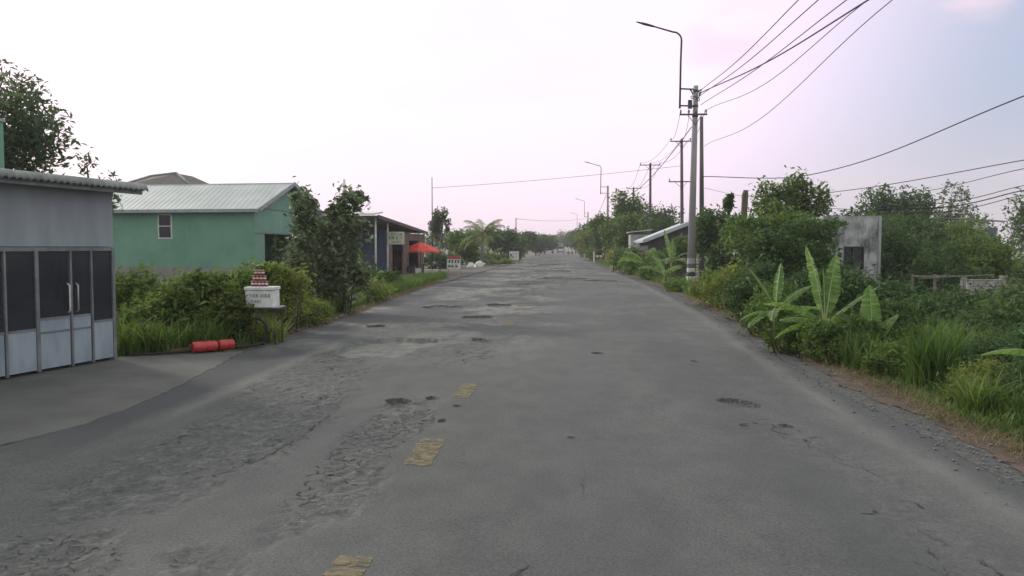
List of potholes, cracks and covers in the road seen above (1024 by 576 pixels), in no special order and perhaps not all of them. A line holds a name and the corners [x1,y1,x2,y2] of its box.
crack [752,422,886,481]
crack [2,534,124,576]
crack [913,530,1004,576]
pothole [710,397,769,410]
pothole [466,336,494,345]
crack [82,352,370,485]
crack [283,403,435,507]
pothole [381,397,419,408]
